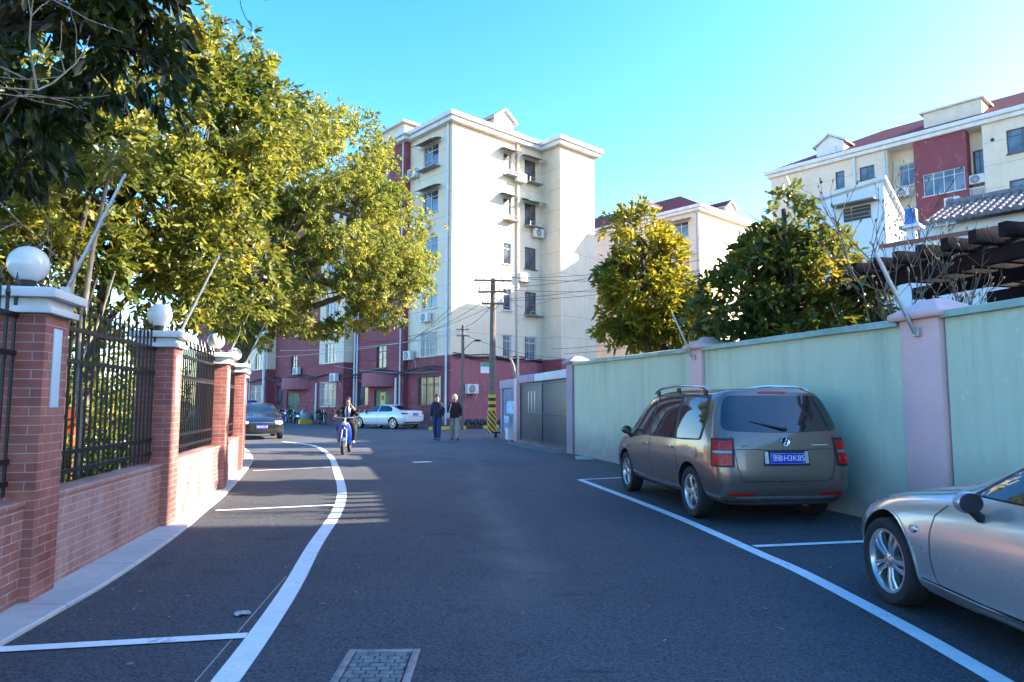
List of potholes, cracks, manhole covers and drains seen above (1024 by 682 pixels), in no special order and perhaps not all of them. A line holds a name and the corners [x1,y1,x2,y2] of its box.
manhole cover [330,649,421,682]
